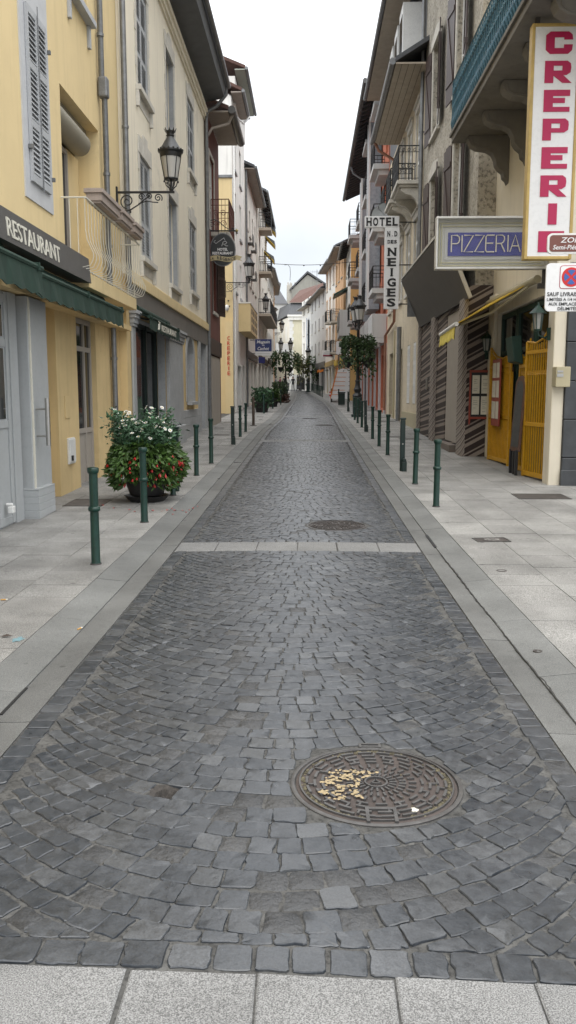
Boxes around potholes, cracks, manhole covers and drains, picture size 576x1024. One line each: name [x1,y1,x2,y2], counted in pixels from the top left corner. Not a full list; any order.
manhole cover [307,520,367,531]
manhole cover [290,743,463,828]
pothole [149,785,180,800]
